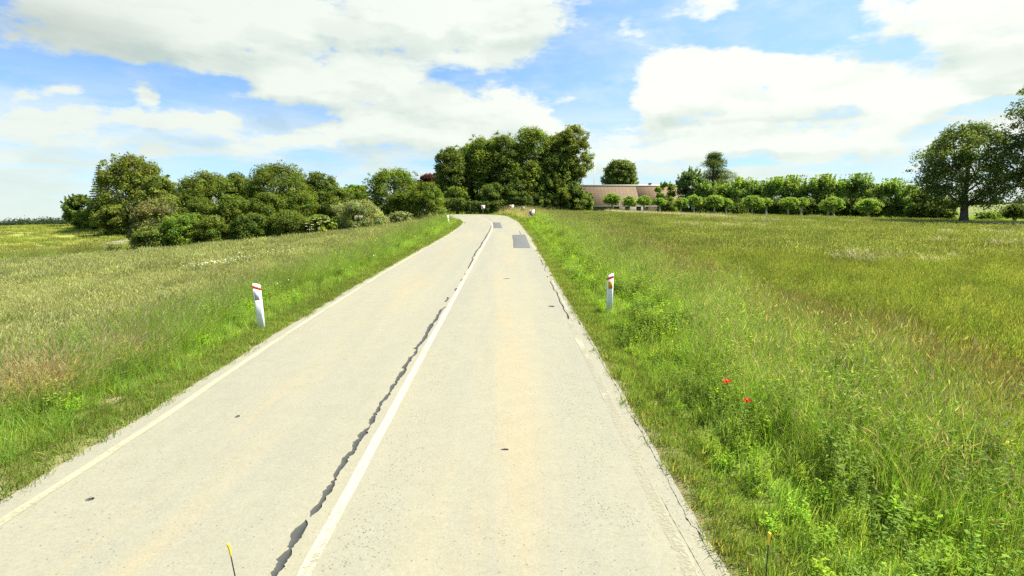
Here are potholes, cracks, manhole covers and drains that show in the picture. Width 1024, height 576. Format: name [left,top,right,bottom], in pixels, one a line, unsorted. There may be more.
crack [271,220,491,576]
crack [570,307,721,576]
